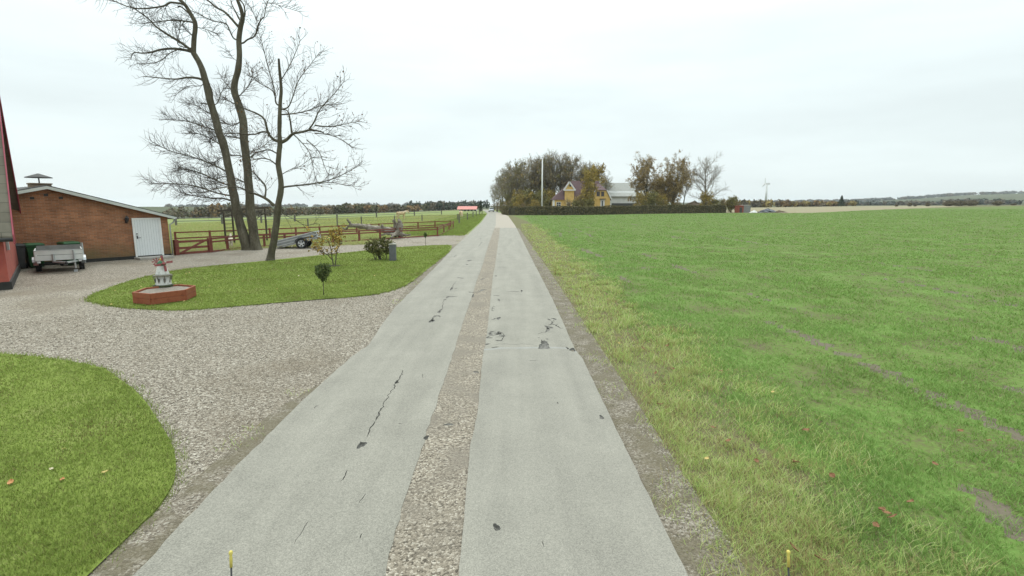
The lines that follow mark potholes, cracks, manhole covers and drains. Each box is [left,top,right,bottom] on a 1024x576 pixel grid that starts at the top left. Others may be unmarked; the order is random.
crack [367,371,403,436]
crack [538,318,560,338]
crack [432,277,535,361]
